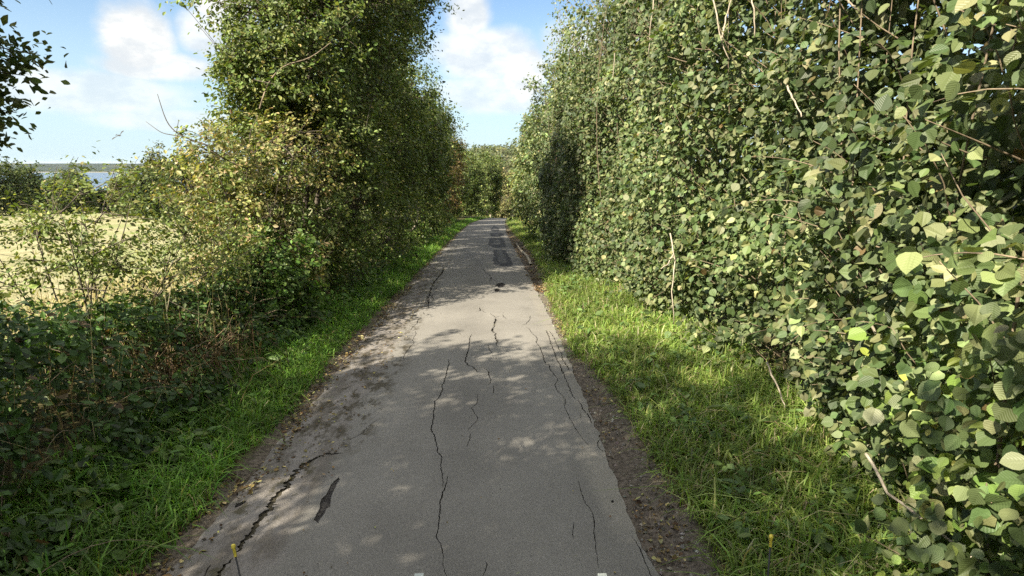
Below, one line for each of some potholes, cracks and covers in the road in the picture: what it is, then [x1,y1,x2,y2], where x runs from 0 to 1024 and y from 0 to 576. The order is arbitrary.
crack [526,323,592,441]
crack [205,421,375,576]
crack [464,310,498,443]
crack [431,363,450,573]
crack [572,485,598,564]
